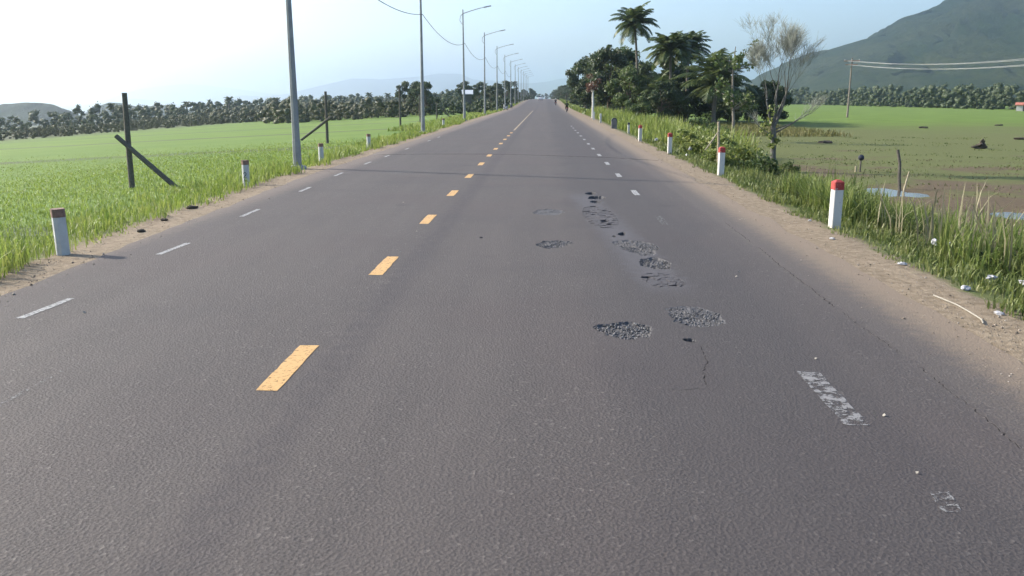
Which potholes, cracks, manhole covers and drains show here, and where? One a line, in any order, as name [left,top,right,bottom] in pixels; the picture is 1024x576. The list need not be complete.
pothole [666,306,726,327]
crack [673,346,709,390]
pothole [536,240,574,249]
pothole [593,321,653,340]
pothole [612,240,659,256]
pothole [639,257,671,270]
